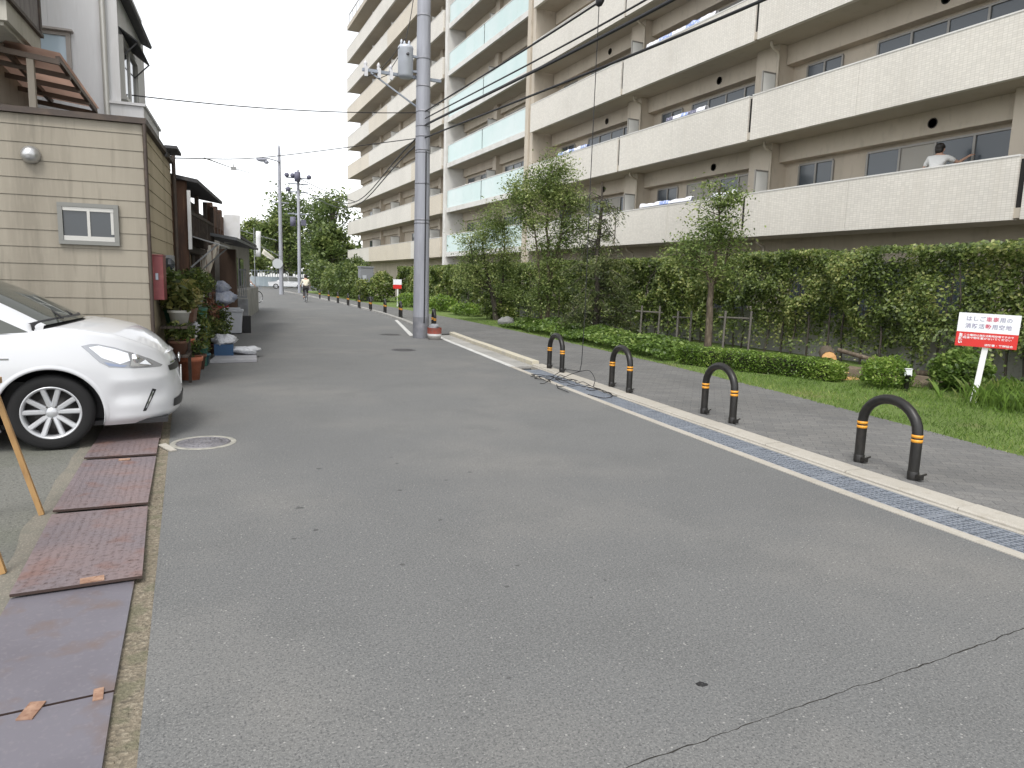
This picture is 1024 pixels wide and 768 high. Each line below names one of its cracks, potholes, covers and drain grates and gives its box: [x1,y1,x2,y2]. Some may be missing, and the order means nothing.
manhole cover [170,436,236,450]
drain grate [814,475,954,517]
drain grate [569,386,616,398]
drain grate [543,377,585,387]
drain grate [525,370,560,378]
drain grate [633,410,702,428]
drain grate [678,427,762,449]
drain grate [598,397,653,411]
crack [626,628,1024,768]
drain grate [735,448,841,478]
drain grate [922,513,1024,553]
